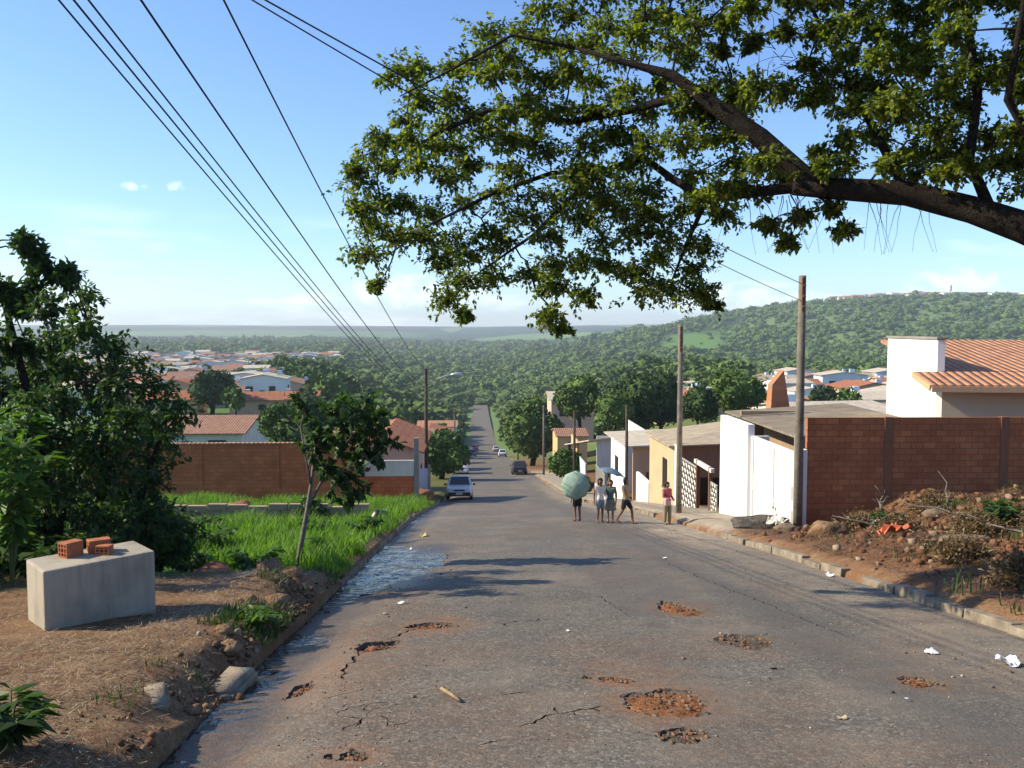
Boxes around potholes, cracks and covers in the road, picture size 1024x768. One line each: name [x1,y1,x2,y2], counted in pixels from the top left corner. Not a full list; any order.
pothole [354,639,400,654]
crack [322,629,415,730]
pothole [335,748,371,761]
pothole [897,675,945,688]
pothole [655,727,710,745]
pothole [656,600,707,616]
pothole [708,633,775,650]
pothole [404,622,459,630]
pothole [620,688,717,719]
crack [519,705,605,727]
